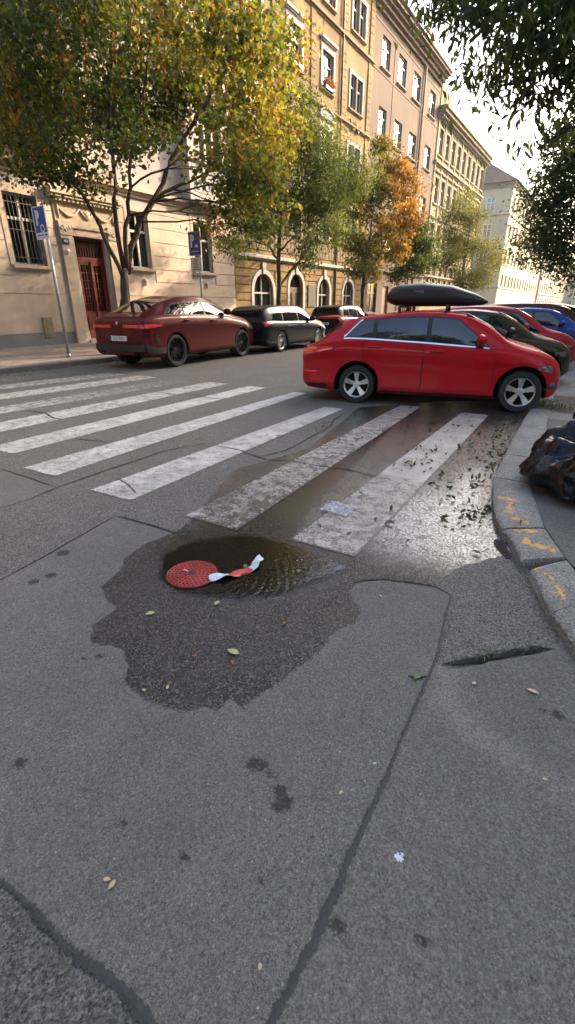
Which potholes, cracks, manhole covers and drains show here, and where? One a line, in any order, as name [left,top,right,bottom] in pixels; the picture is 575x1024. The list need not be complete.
crack [407,646,554,679]
manhole cover [166,561,218,589]
